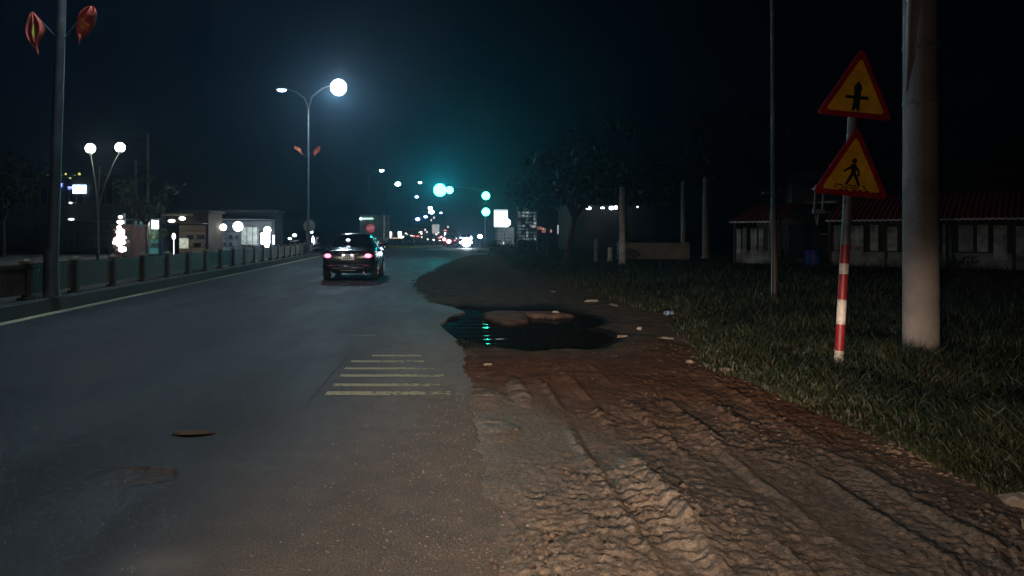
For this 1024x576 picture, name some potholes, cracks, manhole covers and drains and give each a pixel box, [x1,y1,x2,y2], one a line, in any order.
crack [290,346,362,413]
